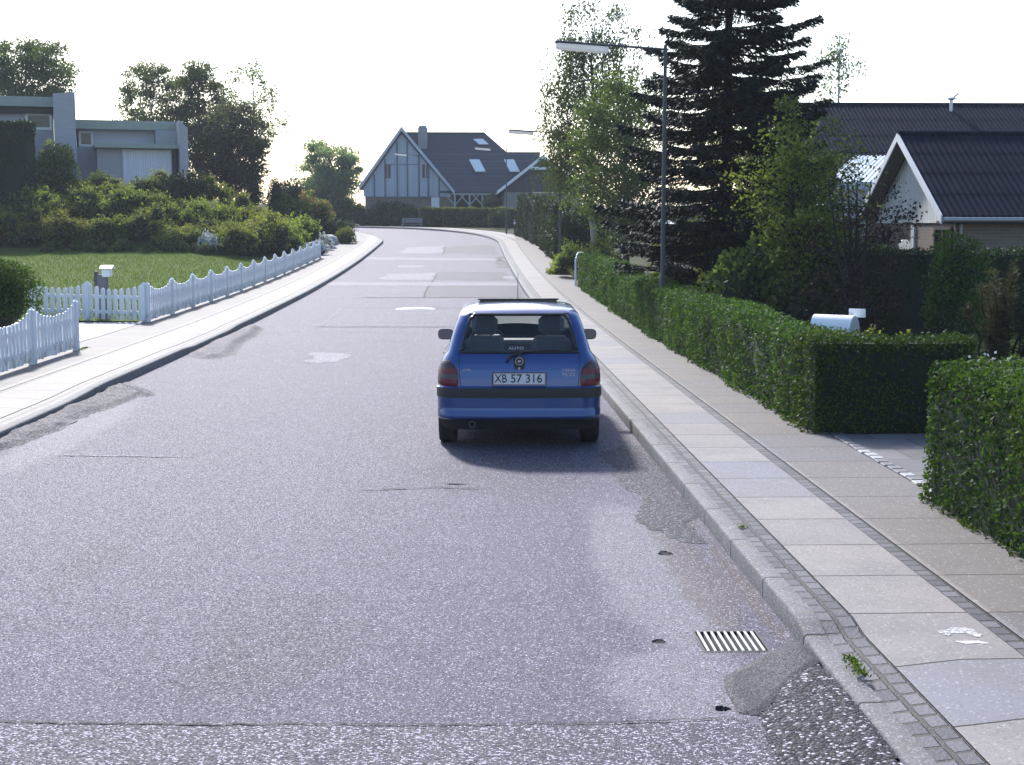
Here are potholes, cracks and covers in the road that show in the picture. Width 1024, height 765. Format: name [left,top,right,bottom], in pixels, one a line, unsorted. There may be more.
drain grate [692,631,770,652]
